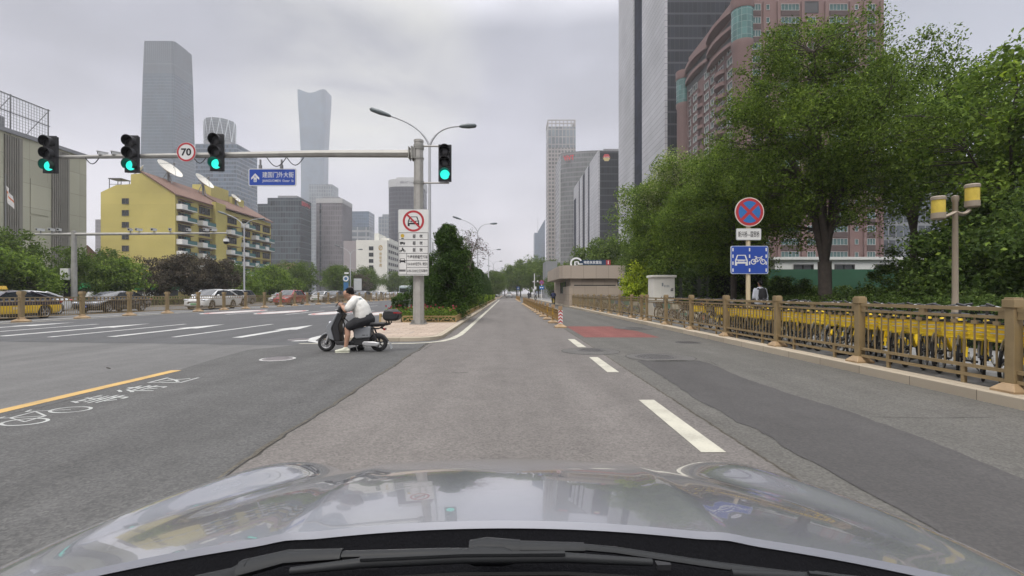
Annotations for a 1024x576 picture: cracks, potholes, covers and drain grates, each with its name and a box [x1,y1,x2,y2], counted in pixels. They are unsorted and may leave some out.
manhole cover [625,353,697,362]
